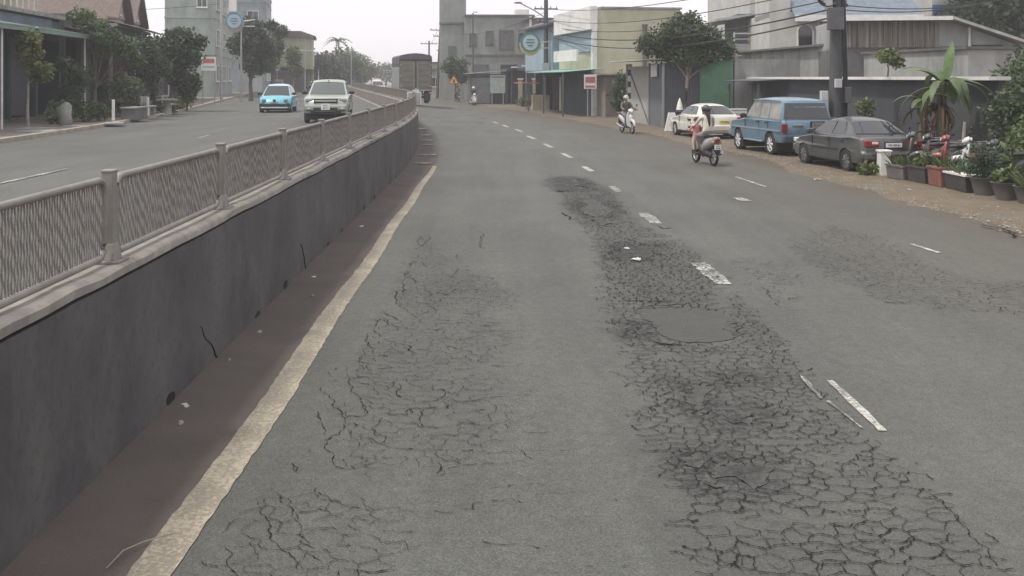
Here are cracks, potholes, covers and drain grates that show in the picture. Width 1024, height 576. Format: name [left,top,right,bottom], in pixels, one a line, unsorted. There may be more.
crack [201,238,550,576]
crack [346,177,1024,576]
